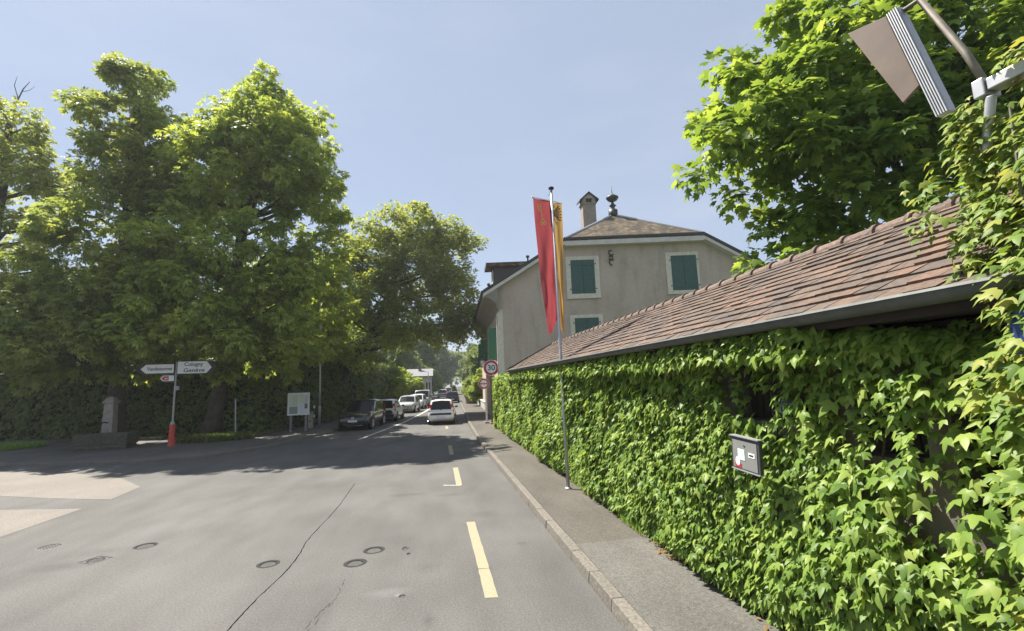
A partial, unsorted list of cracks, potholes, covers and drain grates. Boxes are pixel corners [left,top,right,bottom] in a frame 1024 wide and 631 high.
manhole cover [256,560,280,568]
manhole cover [78,555,112,564]
crack [227,485,354,631]
manhole cover [363,546,385,554]
manhole cover [343,559,367,568]
